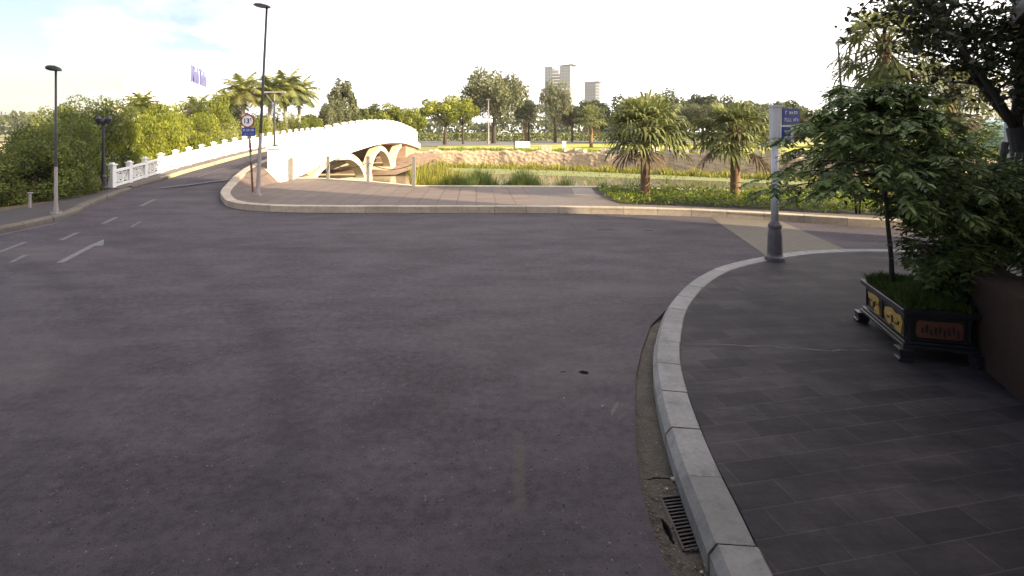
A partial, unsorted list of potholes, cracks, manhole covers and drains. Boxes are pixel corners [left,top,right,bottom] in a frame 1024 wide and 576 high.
drain grate [660,494,699,553]
